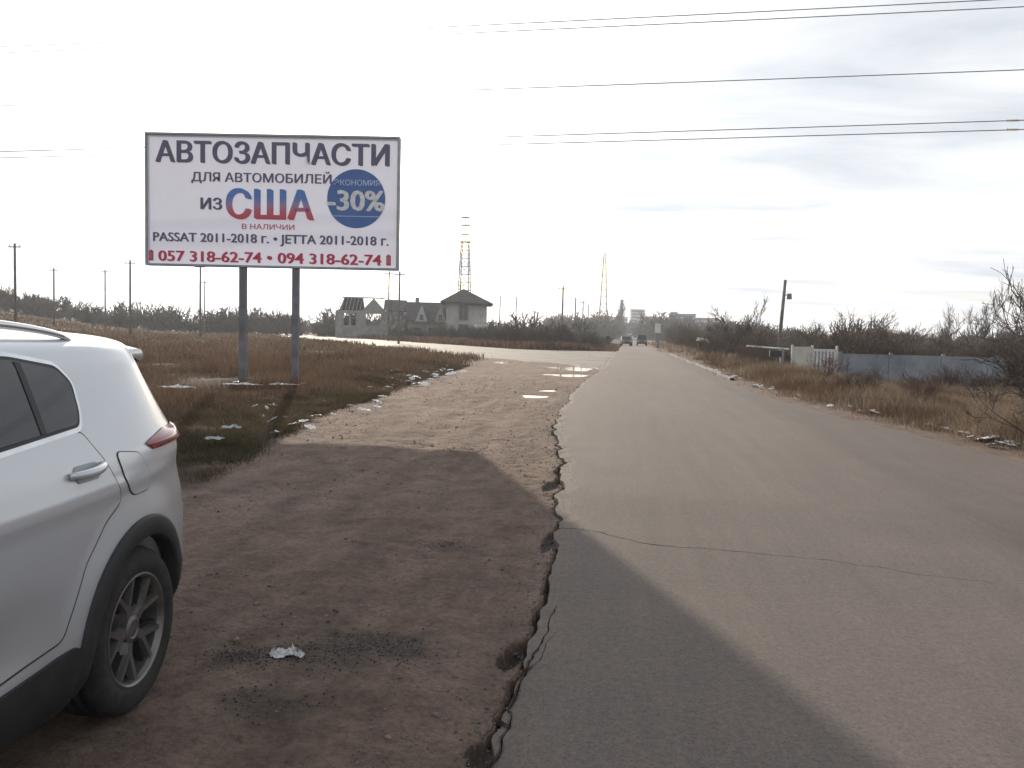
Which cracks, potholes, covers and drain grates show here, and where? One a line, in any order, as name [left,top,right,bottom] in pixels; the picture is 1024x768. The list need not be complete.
crack [483,614,551,768]
